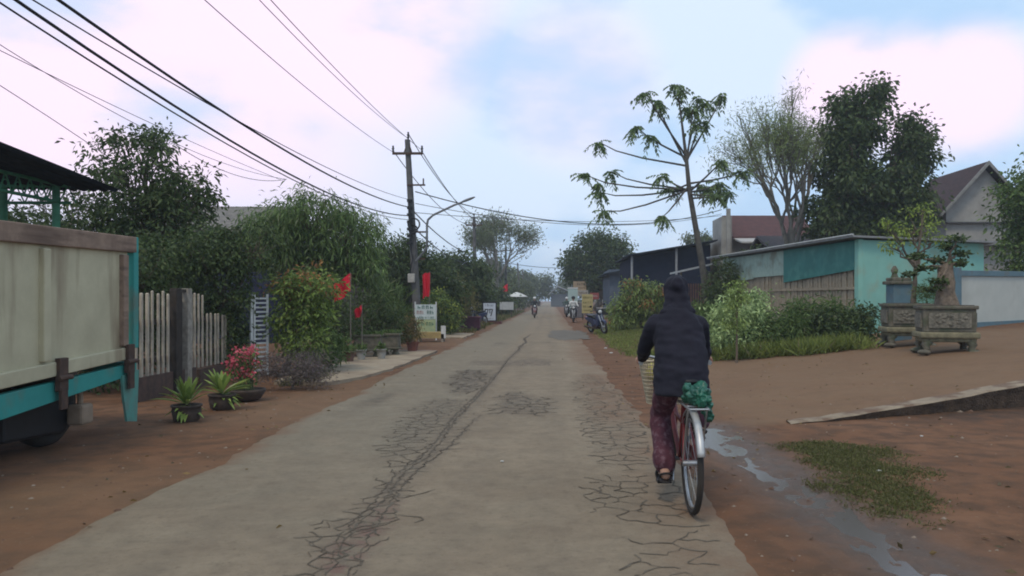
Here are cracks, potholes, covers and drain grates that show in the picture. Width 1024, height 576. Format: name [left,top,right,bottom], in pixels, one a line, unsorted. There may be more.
crack [282,335,558,576]
crack [572,373,720,576]
